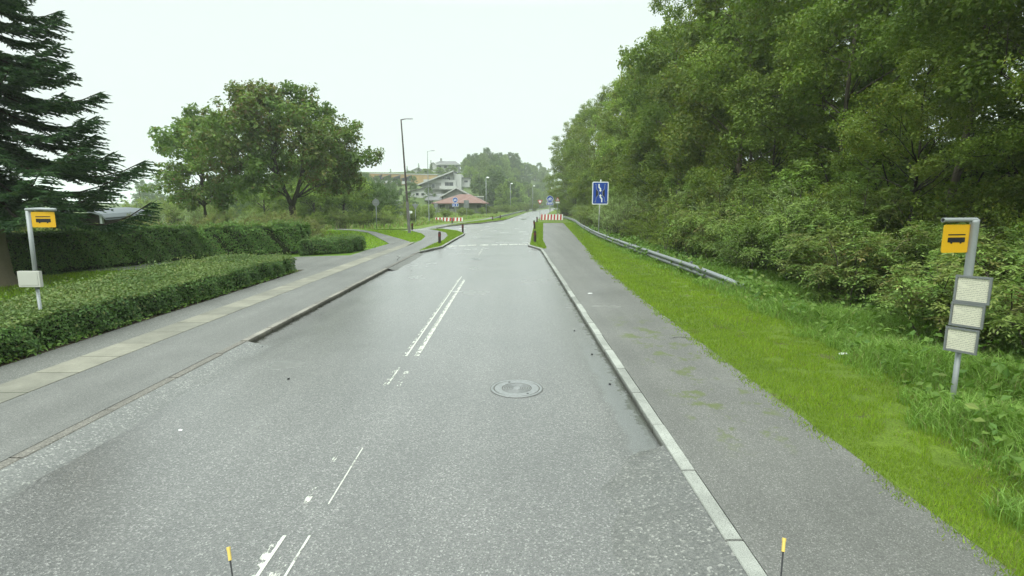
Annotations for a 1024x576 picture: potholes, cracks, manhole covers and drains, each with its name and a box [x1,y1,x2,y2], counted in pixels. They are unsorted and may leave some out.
manhole cover [490,380,543,398]
